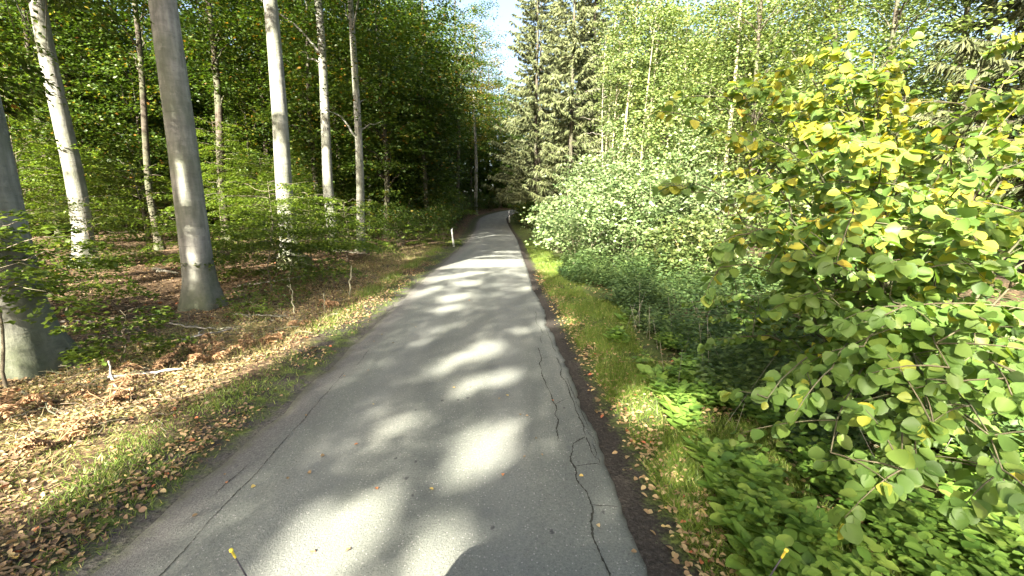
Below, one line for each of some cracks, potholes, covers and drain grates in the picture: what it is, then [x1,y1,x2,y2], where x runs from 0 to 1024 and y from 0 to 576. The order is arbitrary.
crack [535,312,618,576]
